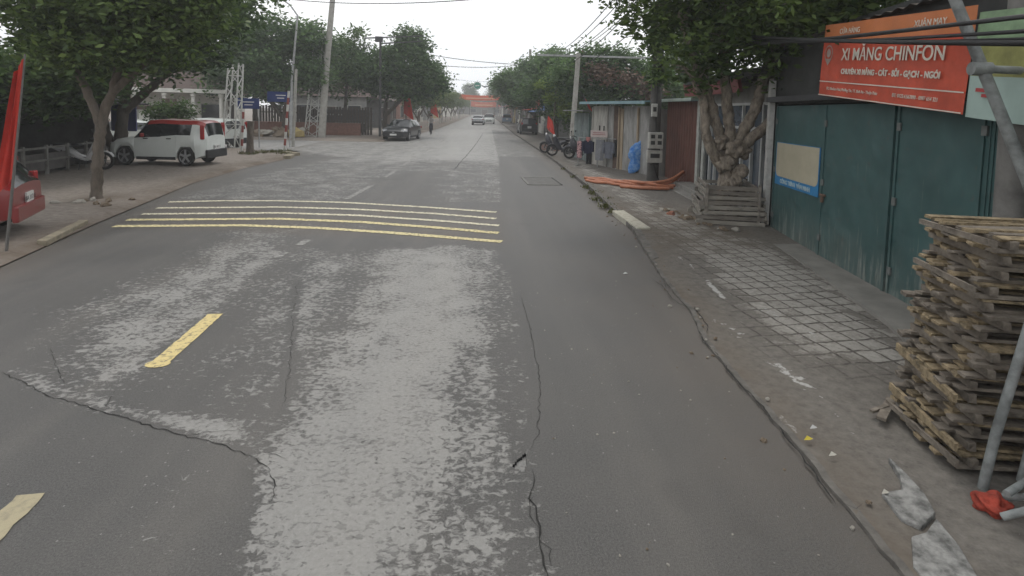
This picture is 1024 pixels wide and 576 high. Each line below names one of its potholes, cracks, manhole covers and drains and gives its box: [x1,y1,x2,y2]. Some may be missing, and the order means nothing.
crack [654,280,859,509]
crack [2,351,283,502]
manhole cover [521,177,562,185]
